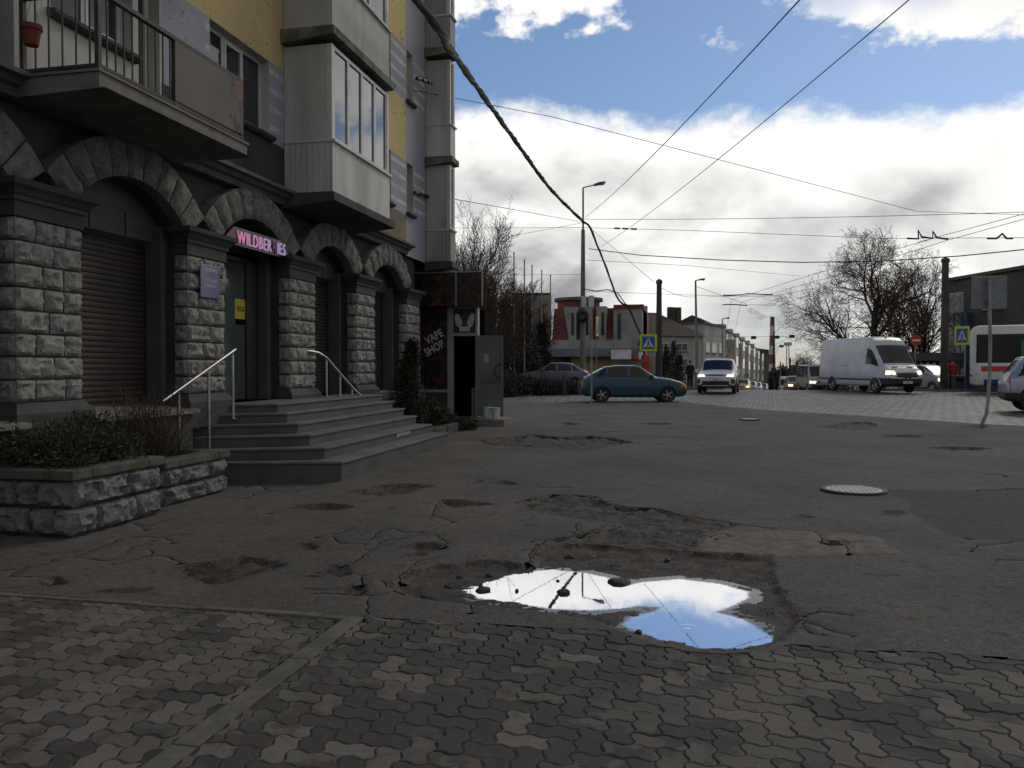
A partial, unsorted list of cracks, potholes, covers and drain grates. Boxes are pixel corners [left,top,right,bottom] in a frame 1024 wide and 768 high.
pothole [390,542,808,654]
pothole [434,499,500,508]
pothole [170,556,291,585]
pothole [814,421,880,430]
pothole [291,502,357,511]
crack [223,483,297,514]
crack [0,513,193,592]
crack [967,541,1024,562]
pothole [476,434,636,452]
crack [274,501,457,621]
manhole cover [820,484,888,496]
pothole [515,494,742,551]
